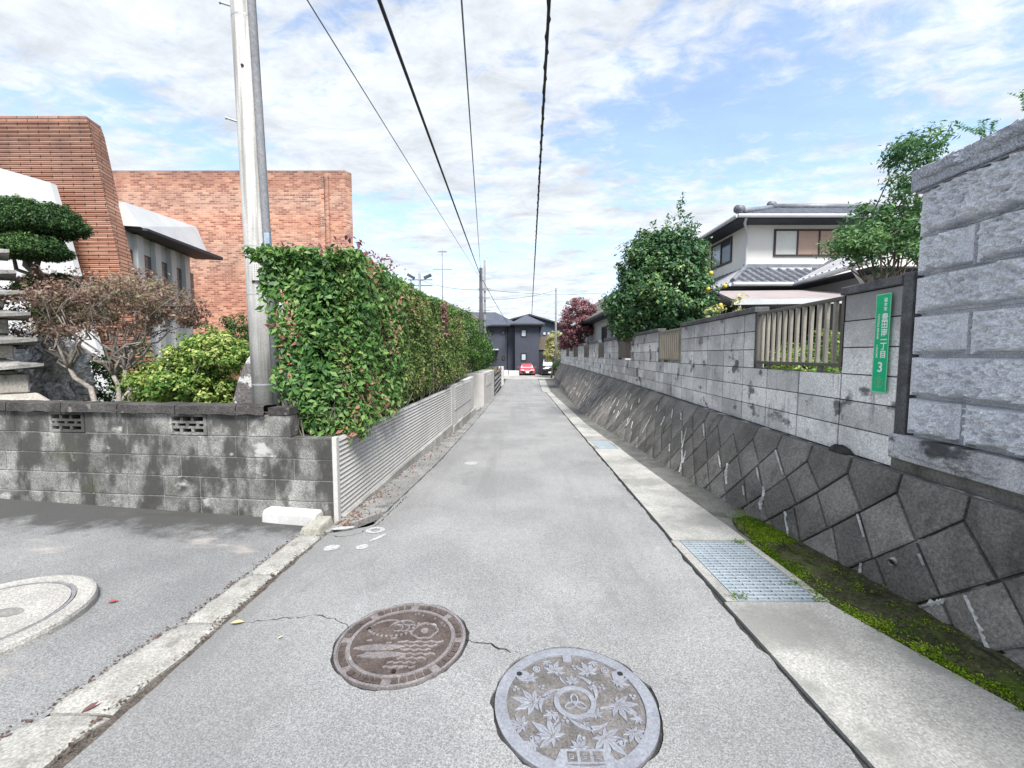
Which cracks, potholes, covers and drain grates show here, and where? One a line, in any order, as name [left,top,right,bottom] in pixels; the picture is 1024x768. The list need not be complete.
drain grate [671,540,830,603]
manhole cover [330,604,469,691]
drain grate [587,441,621,450]
manhole cover [0,575,99,656]
crack [465,639,511,653]
manhole cover [490,648,663,768]
